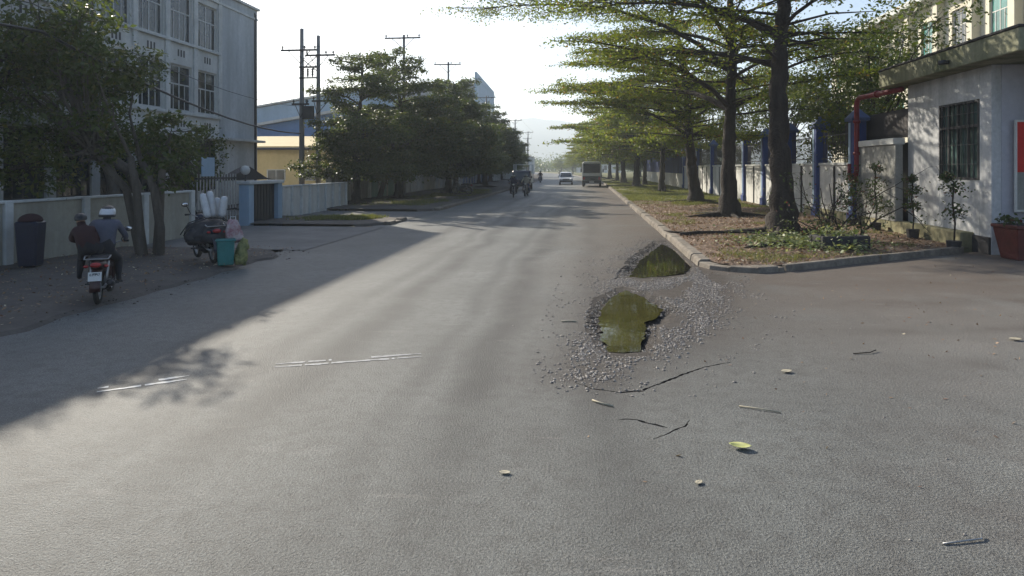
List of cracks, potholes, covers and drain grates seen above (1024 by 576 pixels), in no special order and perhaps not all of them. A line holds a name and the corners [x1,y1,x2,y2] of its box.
pothole [615,241,696,279]
pothole [585,287,678,358]
crack [619,419,689,439]
crack [575,362,730,393]
